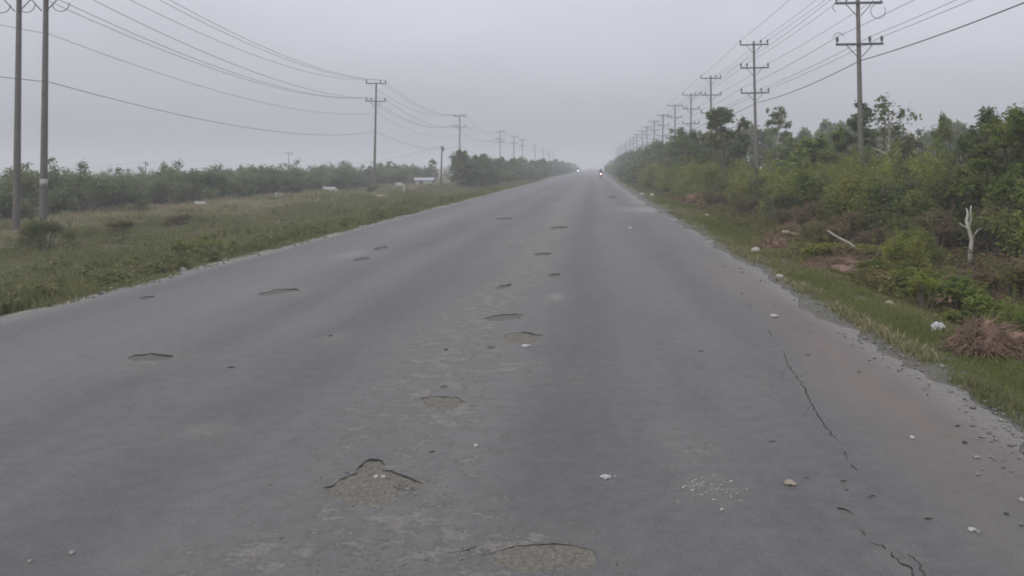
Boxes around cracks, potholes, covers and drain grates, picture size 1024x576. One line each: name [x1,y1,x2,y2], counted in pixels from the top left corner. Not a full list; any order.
pothole [324,458,423,506]
pothole [491,543,597,573]
crack [861,530,926,576]
pothole [504,332,543,345]
pothole [257,288,299,296]
pothole [128,353,174,361]
pothole [421,396,465,410]
